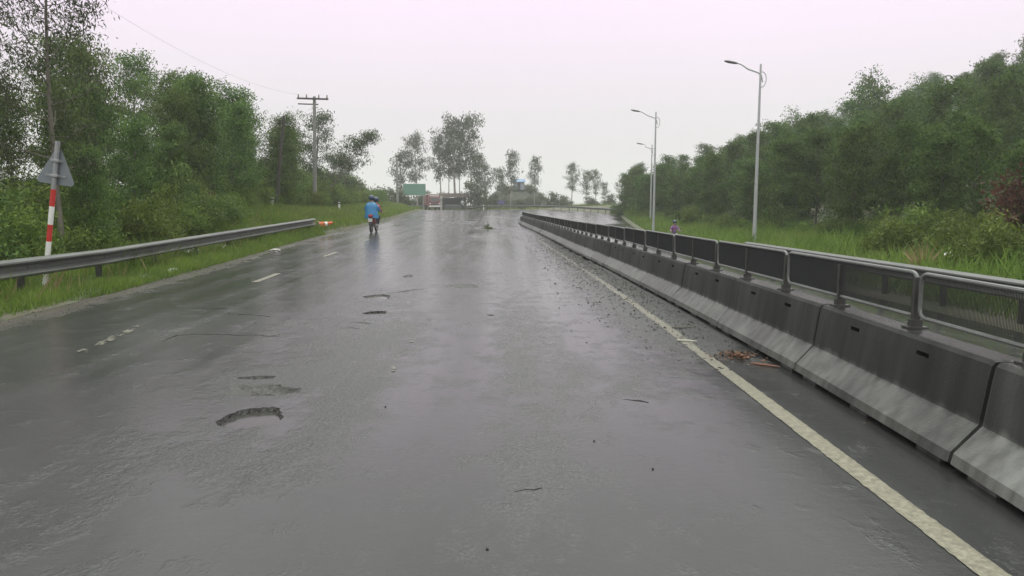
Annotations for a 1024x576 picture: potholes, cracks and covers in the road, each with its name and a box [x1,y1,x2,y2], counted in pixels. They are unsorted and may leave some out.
pothole [225,384,302,397]
crack [163,333,277,341]
pothole [215,407,284,428]
